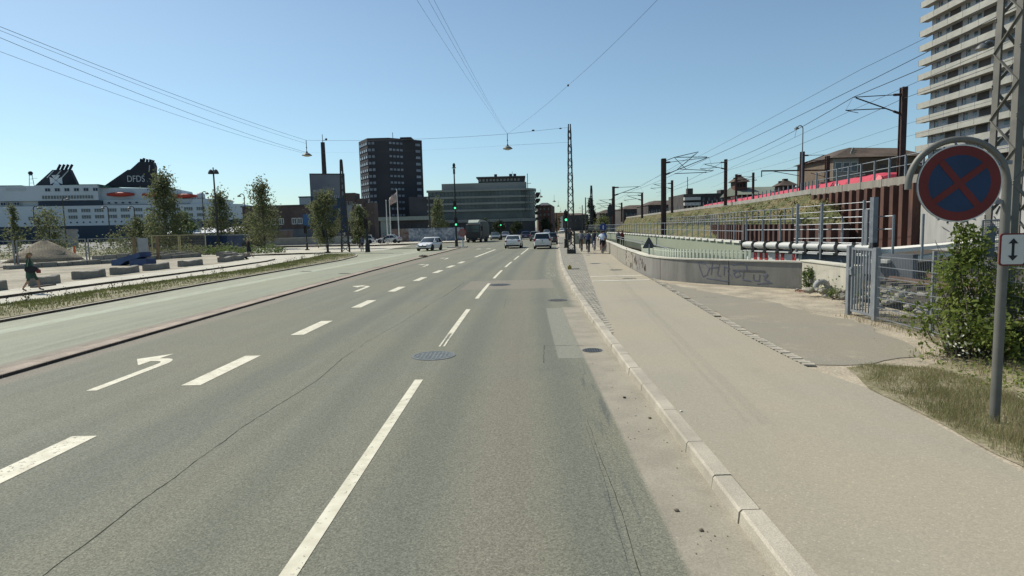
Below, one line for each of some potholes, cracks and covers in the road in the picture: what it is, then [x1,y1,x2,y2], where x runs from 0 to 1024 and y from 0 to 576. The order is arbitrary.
crack [587,420,641,575]
manhole cover [412,351,456,360]
